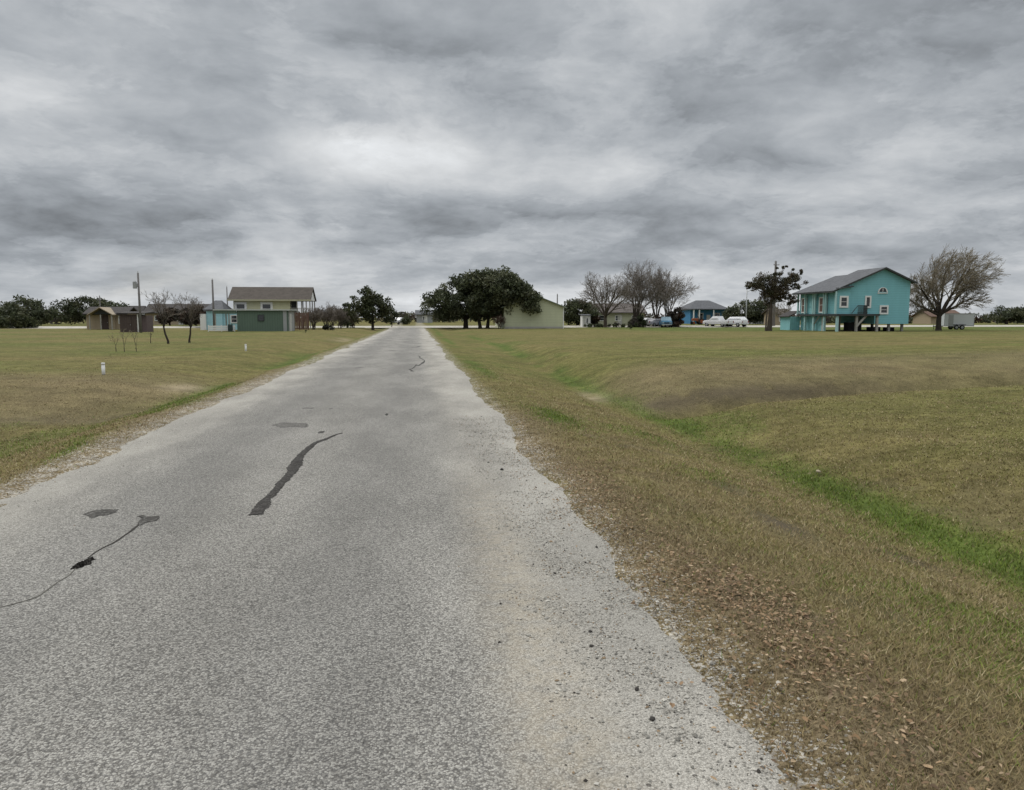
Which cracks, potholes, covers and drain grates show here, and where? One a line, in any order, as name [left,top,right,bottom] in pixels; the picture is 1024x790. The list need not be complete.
crack [1,515,160,607]
